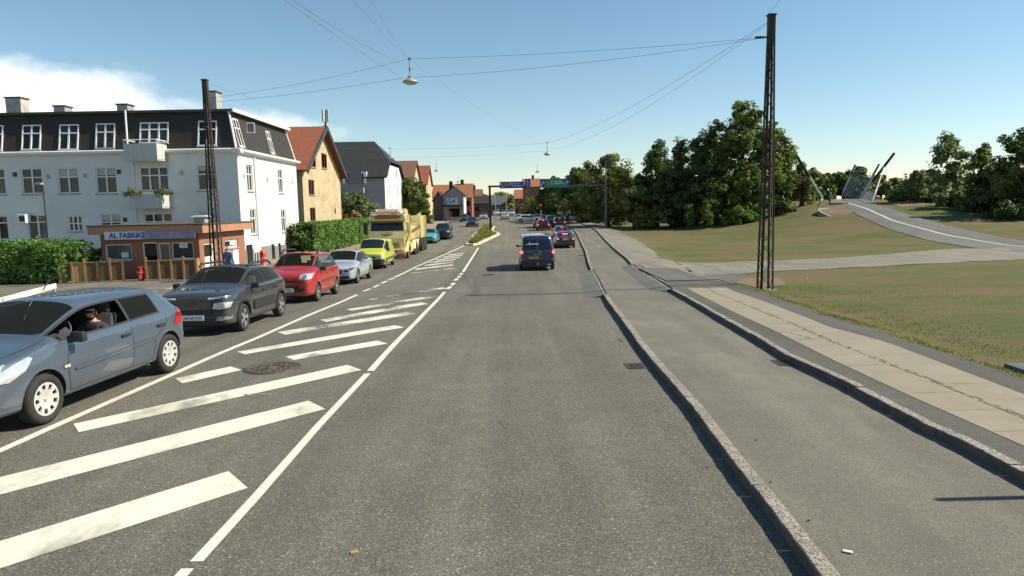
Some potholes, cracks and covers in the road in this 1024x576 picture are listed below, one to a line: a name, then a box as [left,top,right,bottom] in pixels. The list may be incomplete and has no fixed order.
manhole cover [242,361,303,374]
